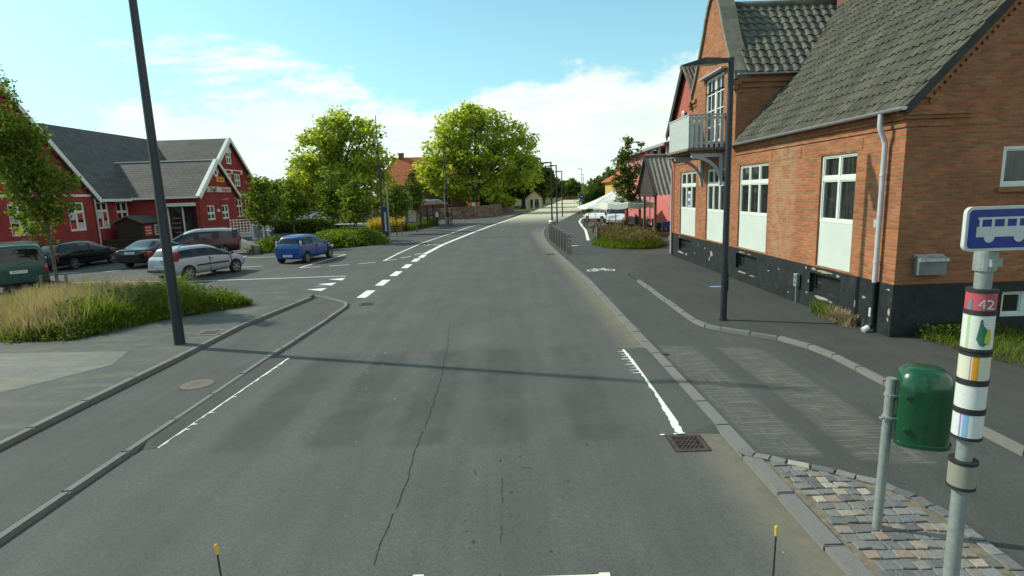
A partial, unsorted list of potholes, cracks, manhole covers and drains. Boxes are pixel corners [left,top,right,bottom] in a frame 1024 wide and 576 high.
drain grate [665,434,712,453]
manhole cover [177,378,217,390]
crack [374,324,451,564]
